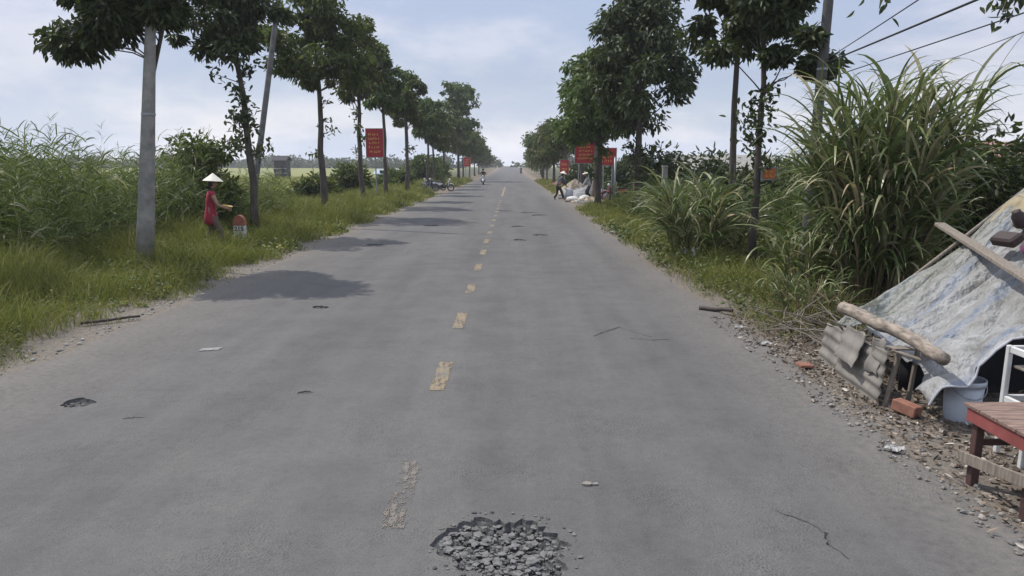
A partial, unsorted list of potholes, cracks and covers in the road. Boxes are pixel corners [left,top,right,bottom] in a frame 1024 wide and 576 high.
pothole [427,509,584,576]
pothole [60,397,97,408]
crack [594,327,670,341]
crack [777,511,849,559]
